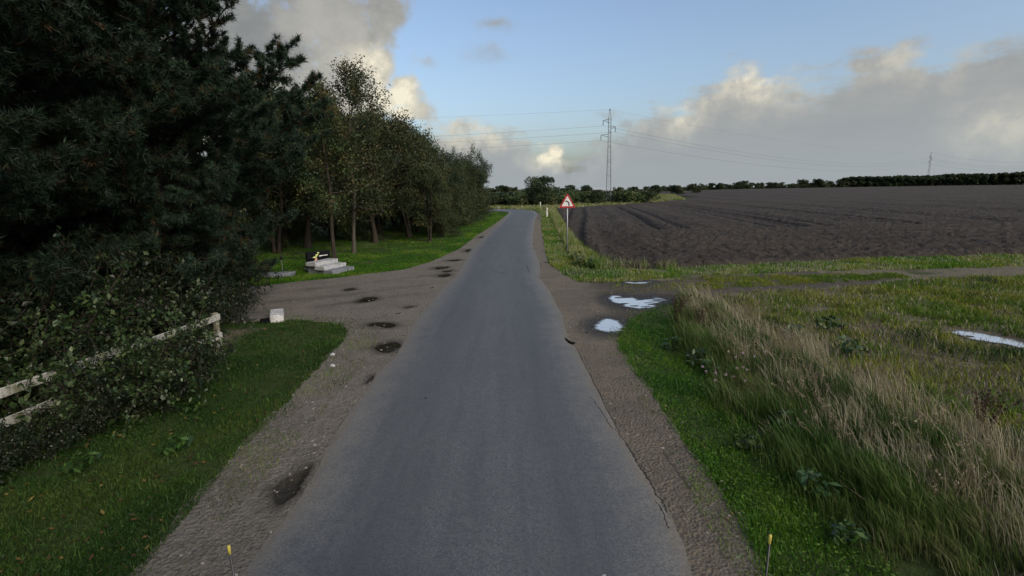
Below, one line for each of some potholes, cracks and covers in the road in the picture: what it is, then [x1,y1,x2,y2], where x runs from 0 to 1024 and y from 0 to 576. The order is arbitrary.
pothole [273,465,312,505]
pothole [374,342,401,353]
